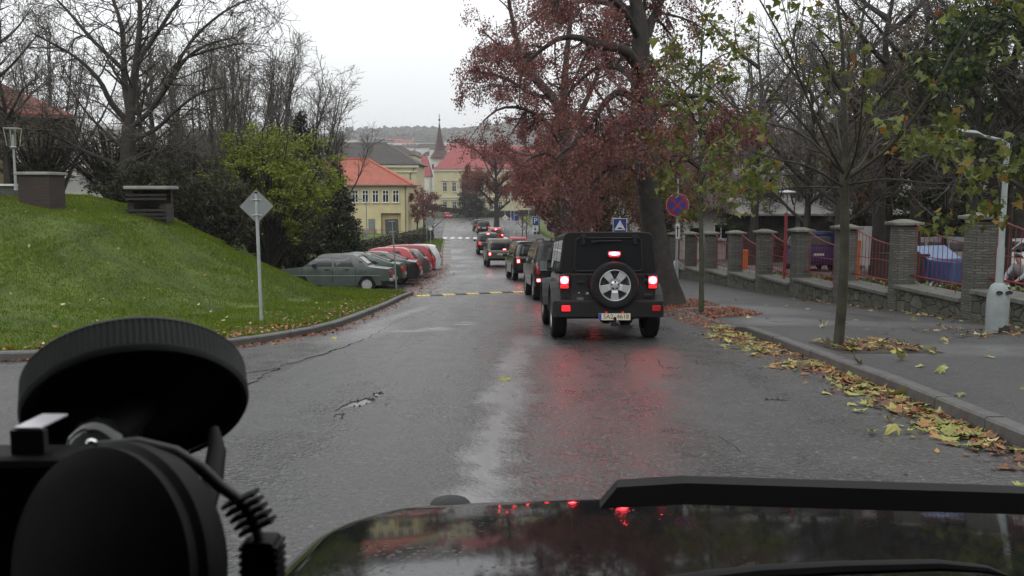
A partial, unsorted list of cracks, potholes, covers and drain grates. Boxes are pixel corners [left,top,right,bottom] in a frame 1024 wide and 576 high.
pothole [336,397,375,411]
